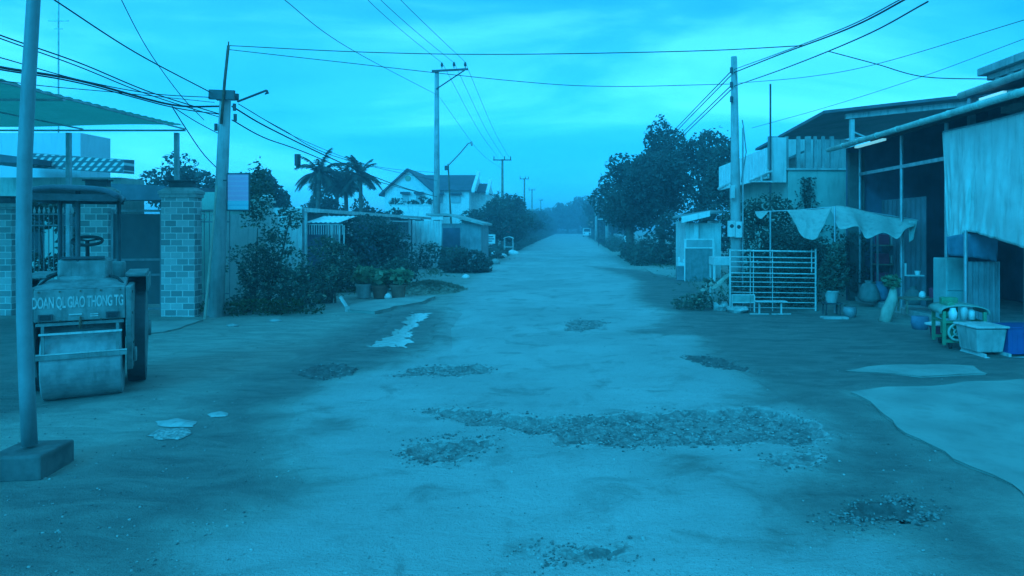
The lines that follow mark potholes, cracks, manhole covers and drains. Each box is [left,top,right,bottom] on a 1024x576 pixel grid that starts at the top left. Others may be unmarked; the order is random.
pothole [390,431,503,469]
pothole [812,490,953,534]
pothole [680,354,760,374]
pothole [386,363,498,379]
pothole [560,318,612,333]
pothole [506,535,655,576]
pothole [412,403,842,452]
pothole [292,362,359,381]
